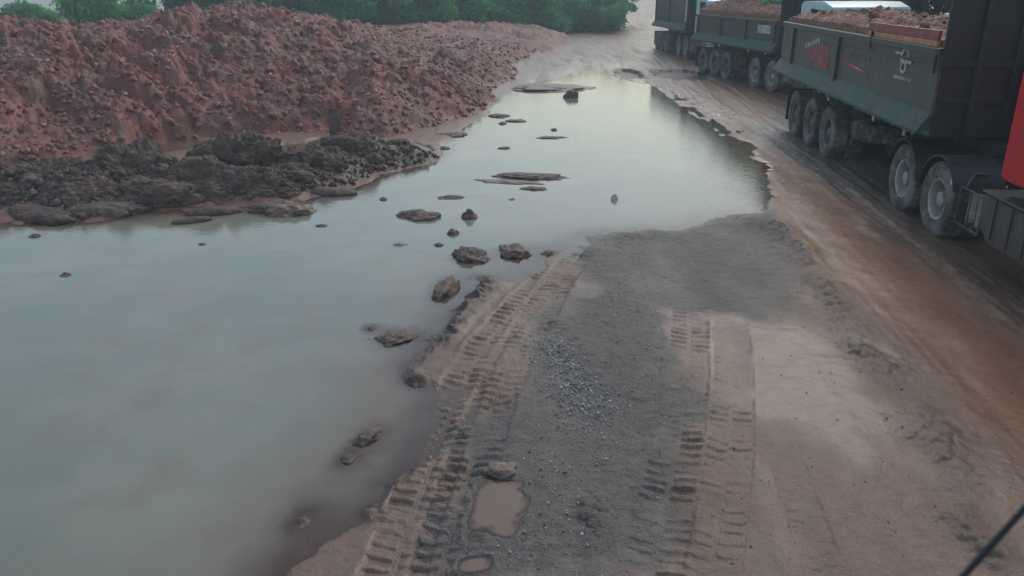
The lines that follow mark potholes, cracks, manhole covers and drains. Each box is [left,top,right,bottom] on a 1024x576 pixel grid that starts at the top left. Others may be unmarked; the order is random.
pothole [453,553,498,574]
pothole [461,472,534,547]
